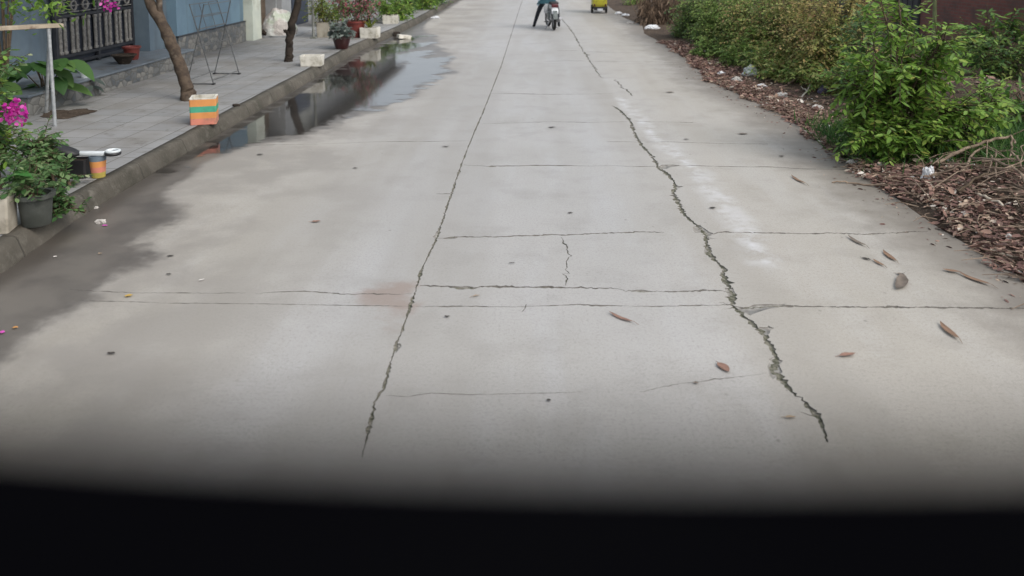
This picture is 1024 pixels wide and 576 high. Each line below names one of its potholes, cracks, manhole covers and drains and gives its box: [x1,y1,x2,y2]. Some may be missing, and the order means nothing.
crack [88,2,1024,436]
